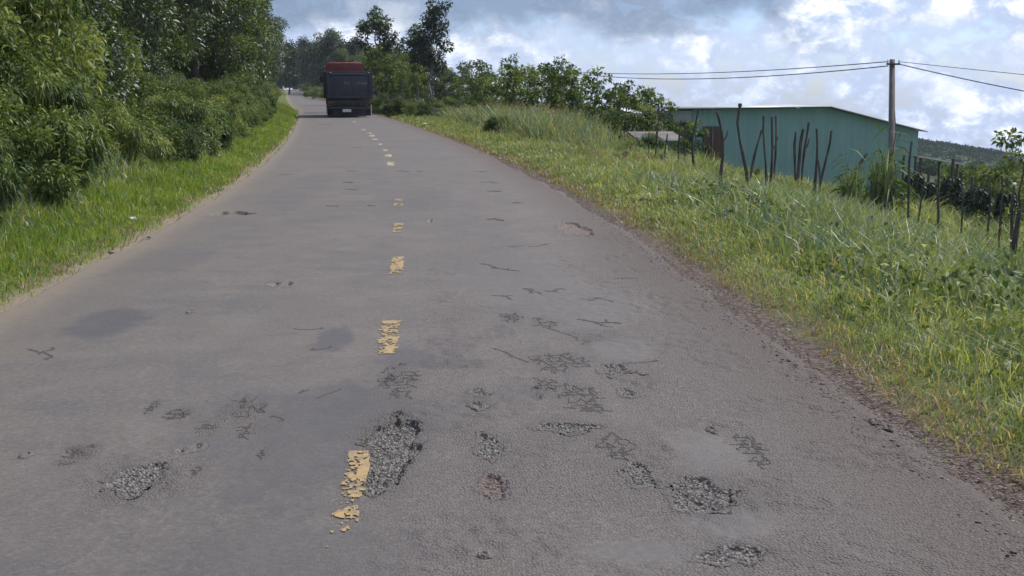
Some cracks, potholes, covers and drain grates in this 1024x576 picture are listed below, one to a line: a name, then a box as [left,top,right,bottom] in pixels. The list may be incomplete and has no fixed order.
pothole [466,400,489,412]
pothole [98,461,174,500]
pothole [464,386,493,397]
pothole [468,429,512,464]
pothole [554,221,599,236]
crack [490,288,622,413]
pothole [660,474,741,516]
crack [729,434,771,469]
crack [144,397,285,458]
crack [376,363,422,399]
pothole [526,420,607,437]
pothole [469,469,510,504]
